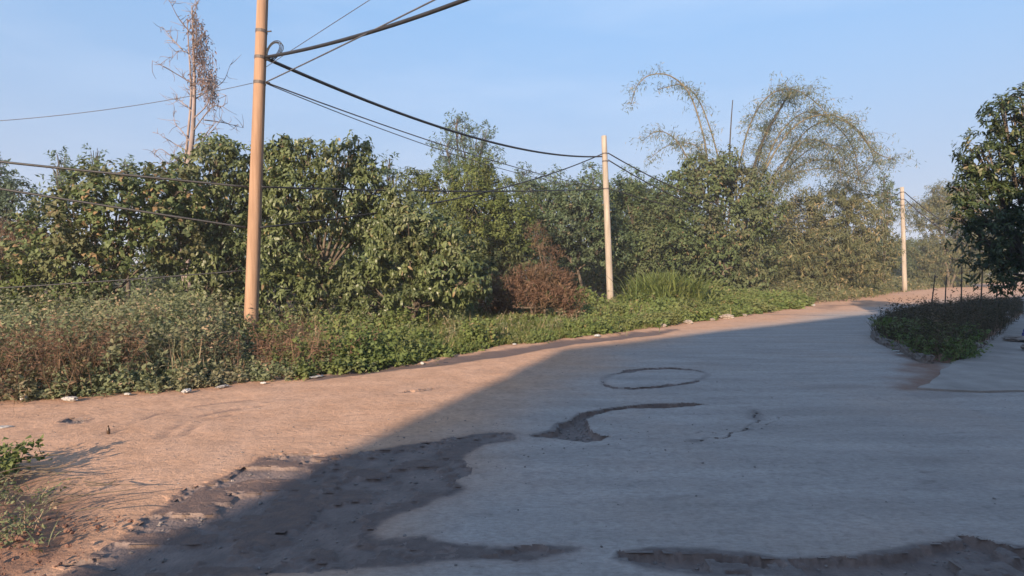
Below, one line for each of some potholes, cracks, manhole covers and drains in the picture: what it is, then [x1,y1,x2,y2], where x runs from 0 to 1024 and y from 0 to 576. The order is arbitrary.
pothole [52,432,581,576]
pothole [525,401,717,445]
crack [687,409,786,445]
pothole [601,530,1024,576]
